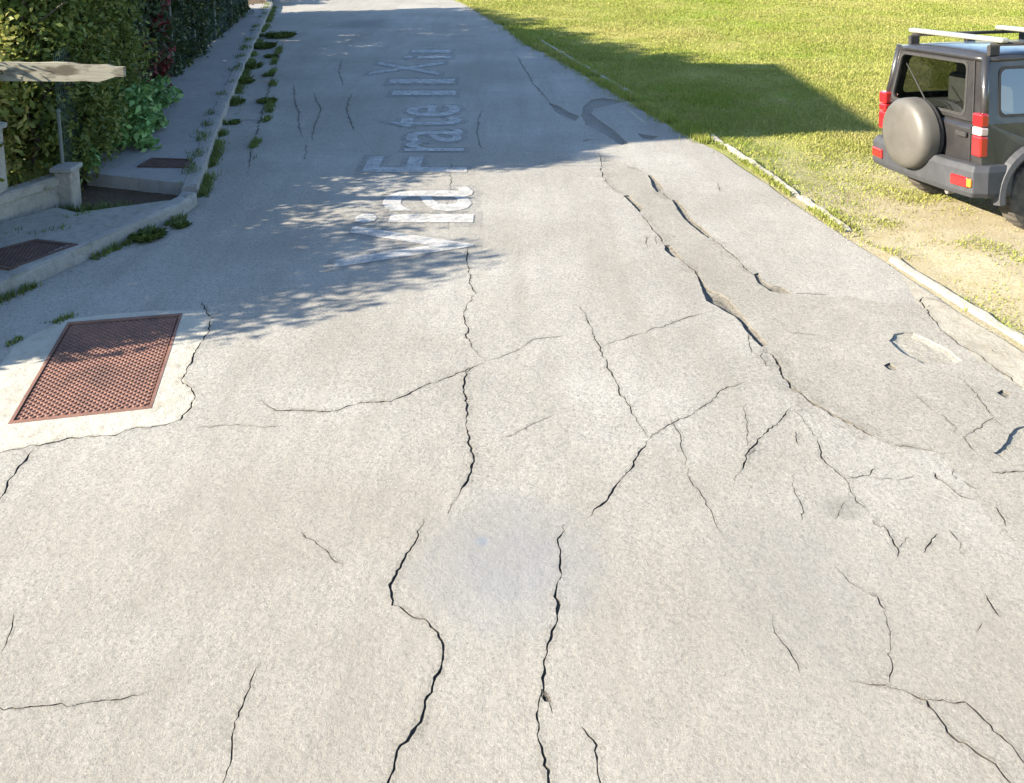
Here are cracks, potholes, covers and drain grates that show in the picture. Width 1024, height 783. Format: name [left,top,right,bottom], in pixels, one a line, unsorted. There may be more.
crack [734,336,935,556]
crack [387,521,445,783]
crack [535,525,564,783]
crack [835,567,1024,783]
crack [0,248,559,513]
crack [0,692,147,711]
crack [772,615,800,673]
crack [636,169,698,274]
crack [240,42,284,169]
crack [934,469,1024,500]
